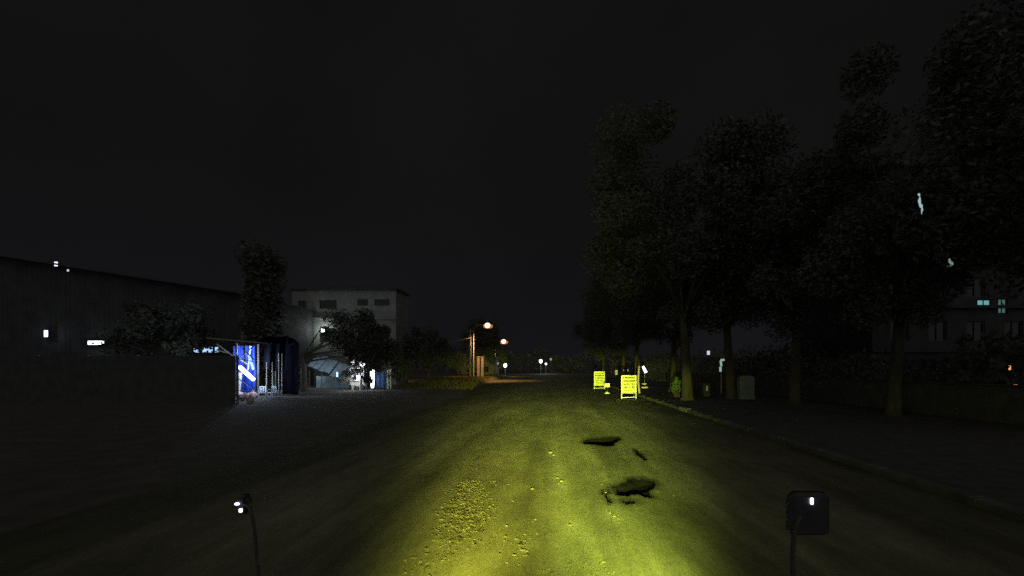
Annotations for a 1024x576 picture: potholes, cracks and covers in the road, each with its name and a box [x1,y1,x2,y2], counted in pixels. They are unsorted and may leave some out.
pothole [607,477,657,498]
pothole [583,436,621,446]
